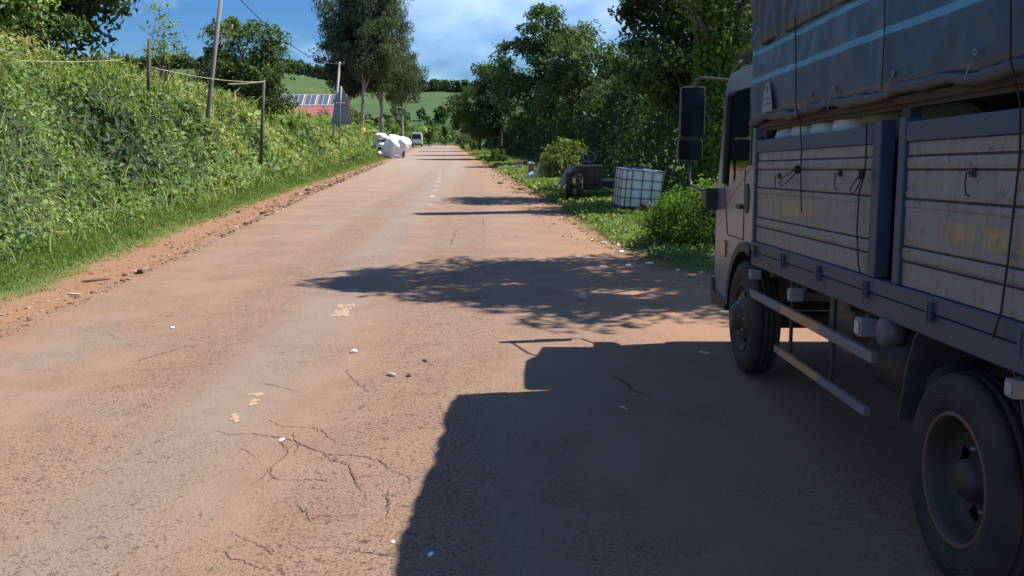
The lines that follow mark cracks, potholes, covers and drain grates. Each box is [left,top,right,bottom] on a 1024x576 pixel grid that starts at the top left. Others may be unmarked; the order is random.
crack [220,420,435,521]
crack [224,534,395,570]
